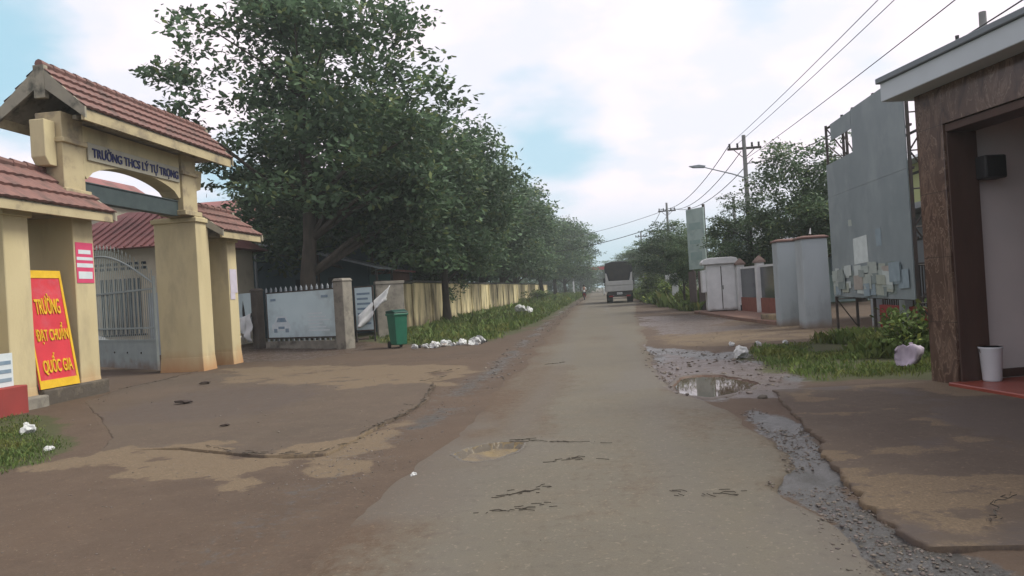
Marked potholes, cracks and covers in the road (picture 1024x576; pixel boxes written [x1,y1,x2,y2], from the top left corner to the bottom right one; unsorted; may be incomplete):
crack [207,368,460,454]
pothole [450,441,527,463]
crack [509,438,612,462]
crack [669,489,747,497]
pothole [668,373,764,401]
crack [986,492,1017,522]
crack [475,484,556,513]
